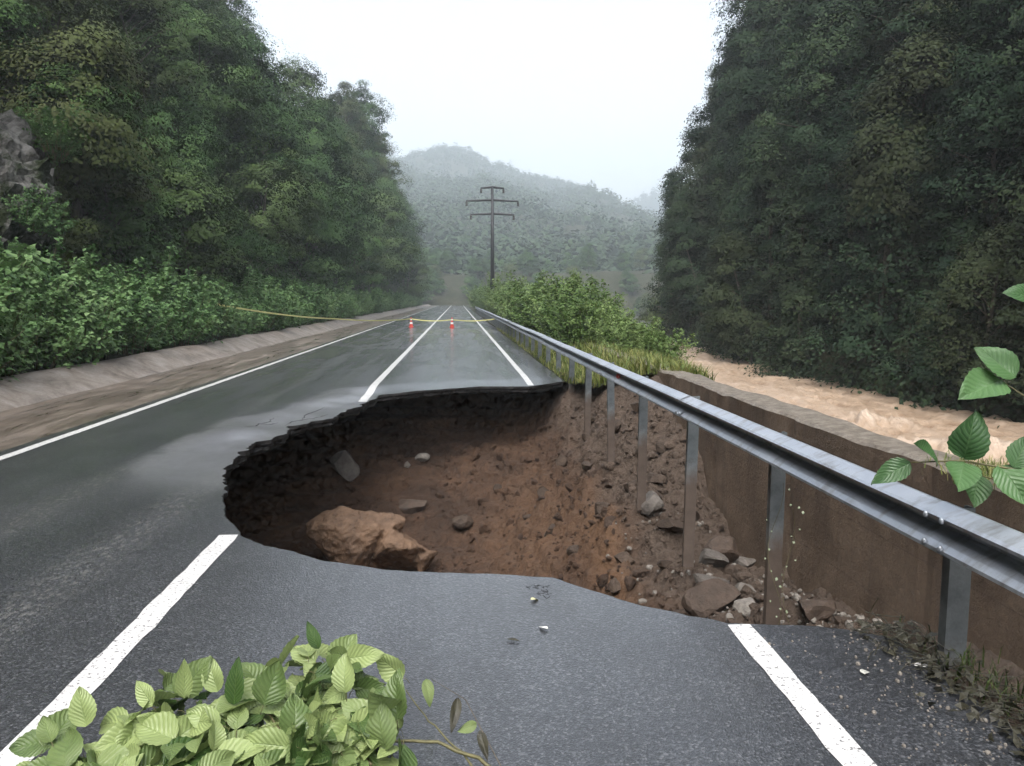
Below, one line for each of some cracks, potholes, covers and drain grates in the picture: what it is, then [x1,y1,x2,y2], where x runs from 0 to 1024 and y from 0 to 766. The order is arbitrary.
crack [256,408,325,426]
